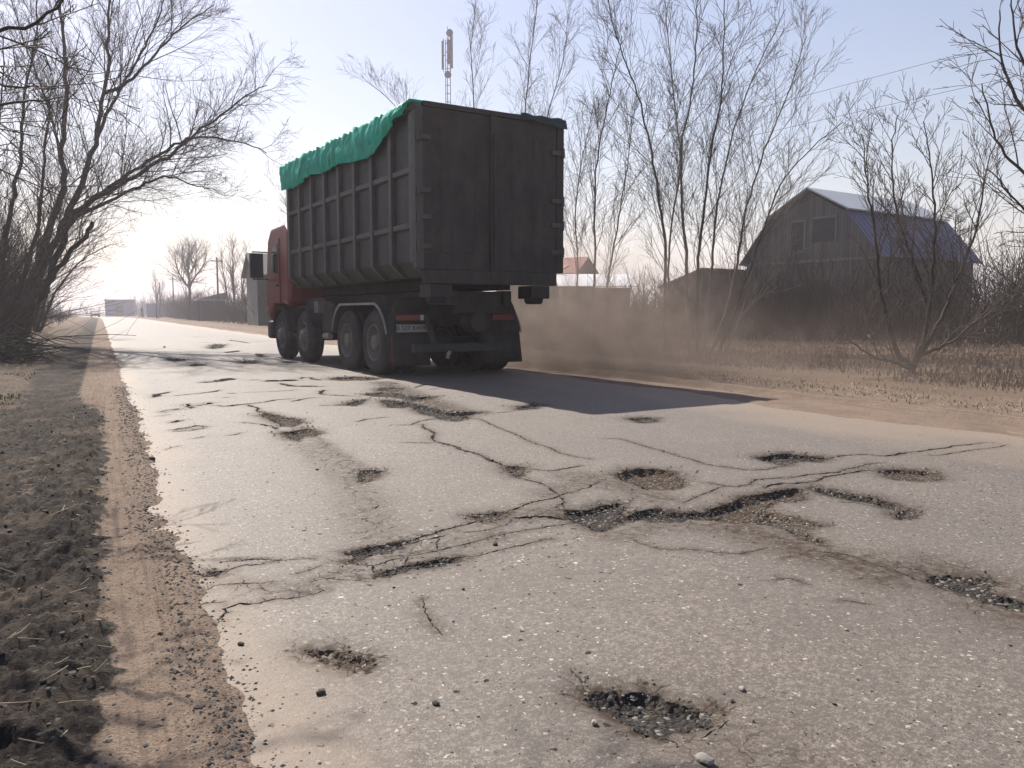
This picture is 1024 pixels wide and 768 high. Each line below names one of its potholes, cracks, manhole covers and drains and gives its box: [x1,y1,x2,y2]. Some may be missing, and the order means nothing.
pothole [878,470,942,482]
pothole [380,400,412,408]
pothole [261,413,302,427]
pothole [280,428,320,441]
pothole [706,488,805,524]
pothole [582,690,716,740]
pothole [758,453,828,466]
crack [367,411,599,572]
pothole [375,557,464,577]
crack [421,597,443,635]
